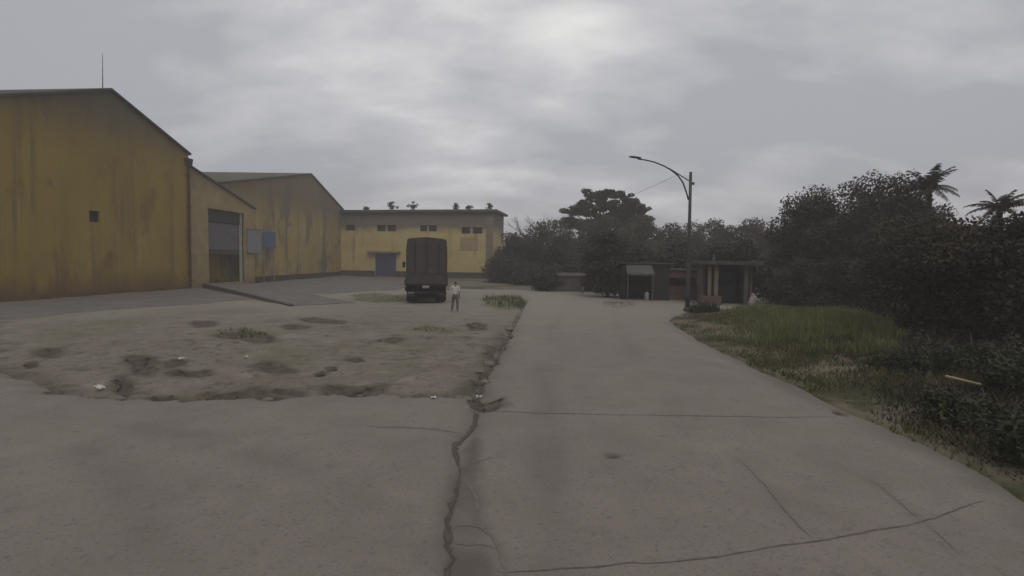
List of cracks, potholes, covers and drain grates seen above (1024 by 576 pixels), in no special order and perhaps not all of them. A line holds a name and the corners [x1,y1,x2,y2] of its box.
crack [867,477,956,551]
pothole [36,348,61,358]
pothole [124,356,159,376]
pothole [110,377,134,396]
pothole [256,361,290,374]
pothole [466,398,505,413]
crack [745,465,812,538]
crack [372,301,528,576]
